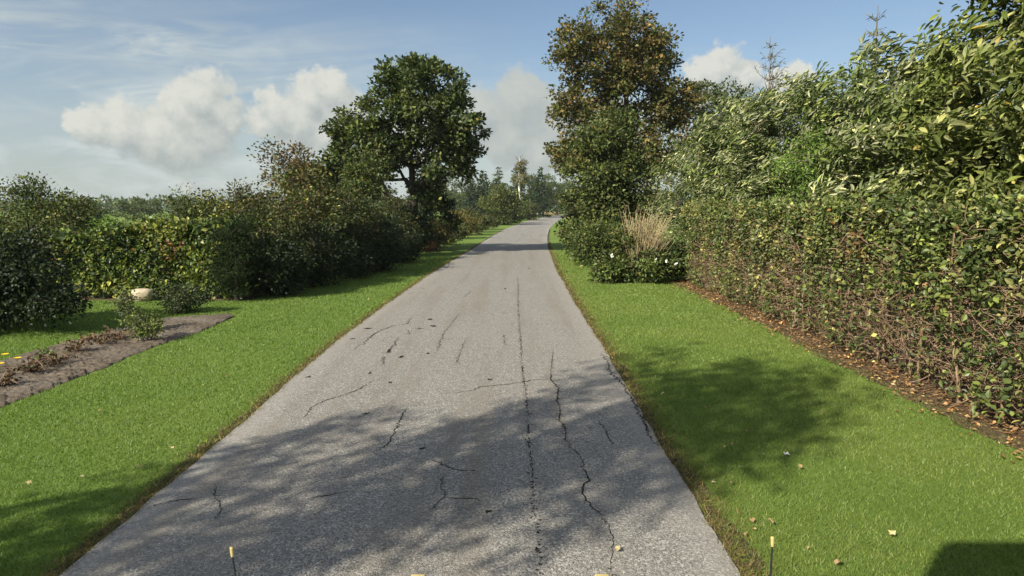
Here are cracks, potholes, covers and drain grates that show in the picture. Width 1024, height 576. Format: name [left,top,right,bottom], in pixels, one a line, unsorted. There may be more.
crack [600,354,659,449]
crack [355,319,410,363]
crack [445,352,618,576]
crack [432,460,481,509]
